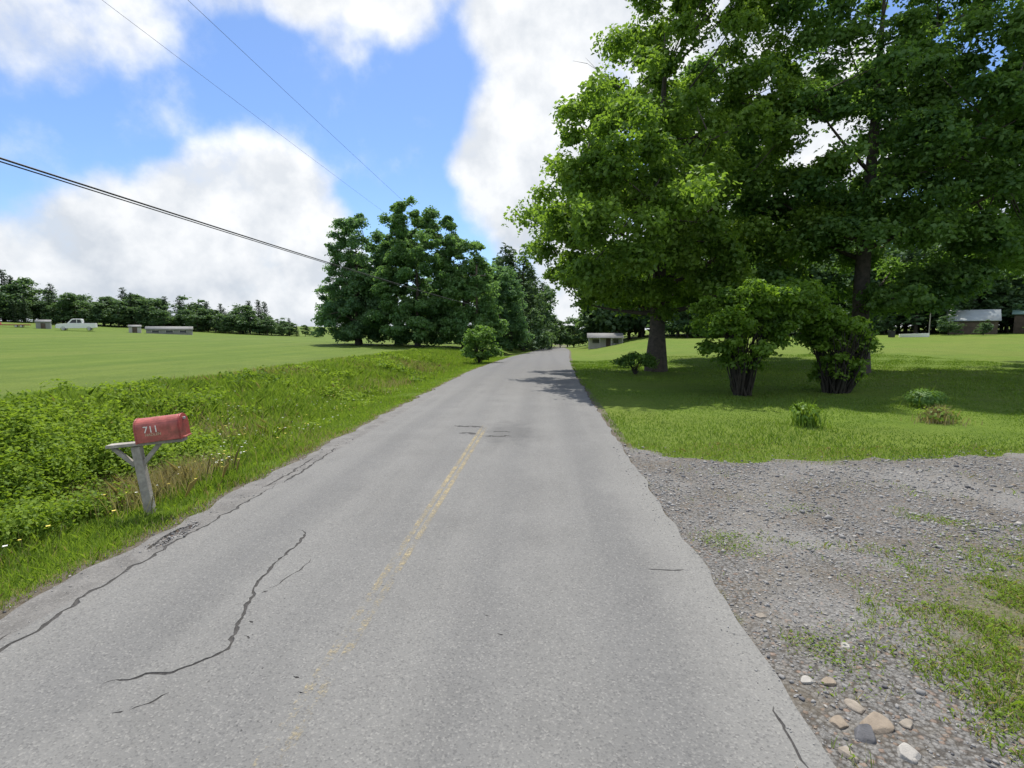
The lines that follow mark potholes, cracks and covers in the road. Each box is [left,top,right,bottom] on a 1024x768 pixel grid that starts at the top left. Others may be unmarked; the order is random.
pothole [147,522,199,550]
crack [772,706,809,768]
crack [0,449,334,713]
